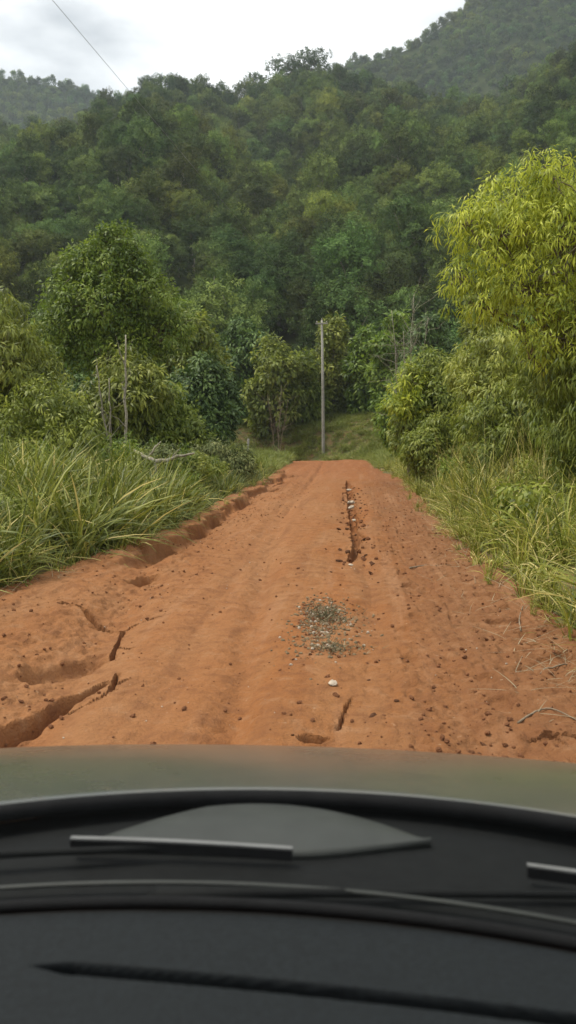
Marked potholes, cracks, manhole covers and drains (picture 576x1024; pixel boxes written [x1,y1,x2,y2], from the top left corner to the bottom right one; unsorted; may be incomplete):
crack [325,481,378,575]
crack [61,601,154,713]
pothole [123,573,161,588]
pothole [184,524,205,541]
crack [338,700,351,731]
pothole [295,733,330,744]
pothole [202,514,224,529]
pothole [137,537,186,565]
pothole [231,497,254,510]
